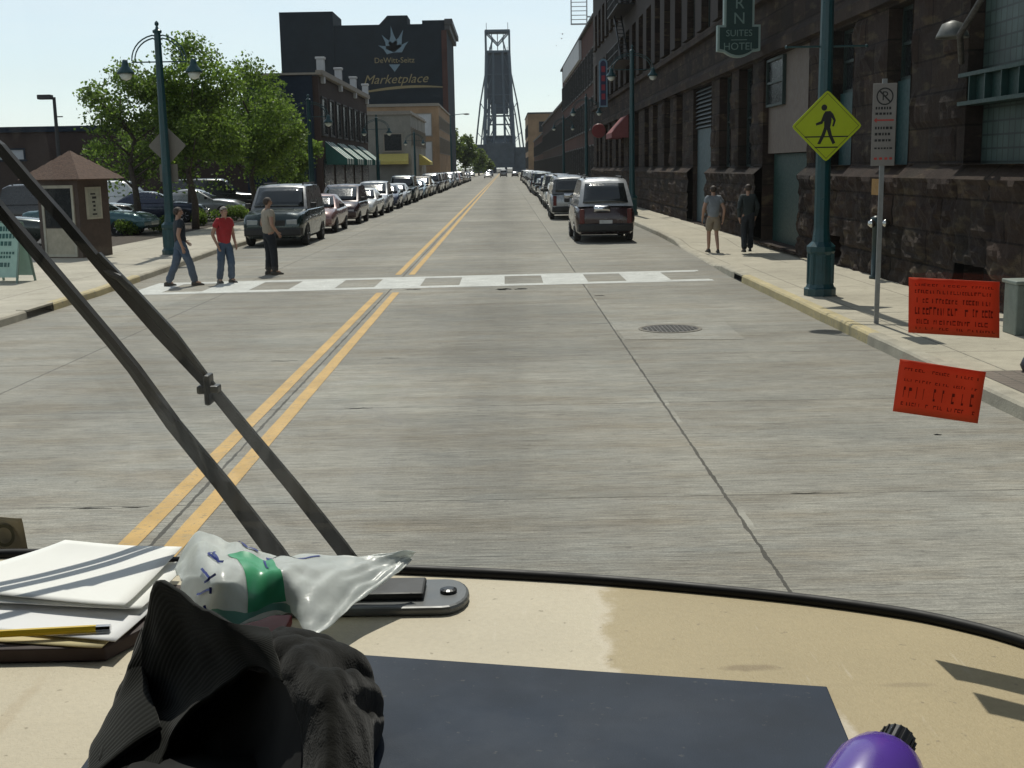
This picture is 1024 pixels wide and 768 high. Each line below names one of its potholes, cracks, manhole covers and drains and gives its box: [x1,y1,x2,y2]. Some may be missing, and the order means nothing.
manhole cover [638,324,702,333]
